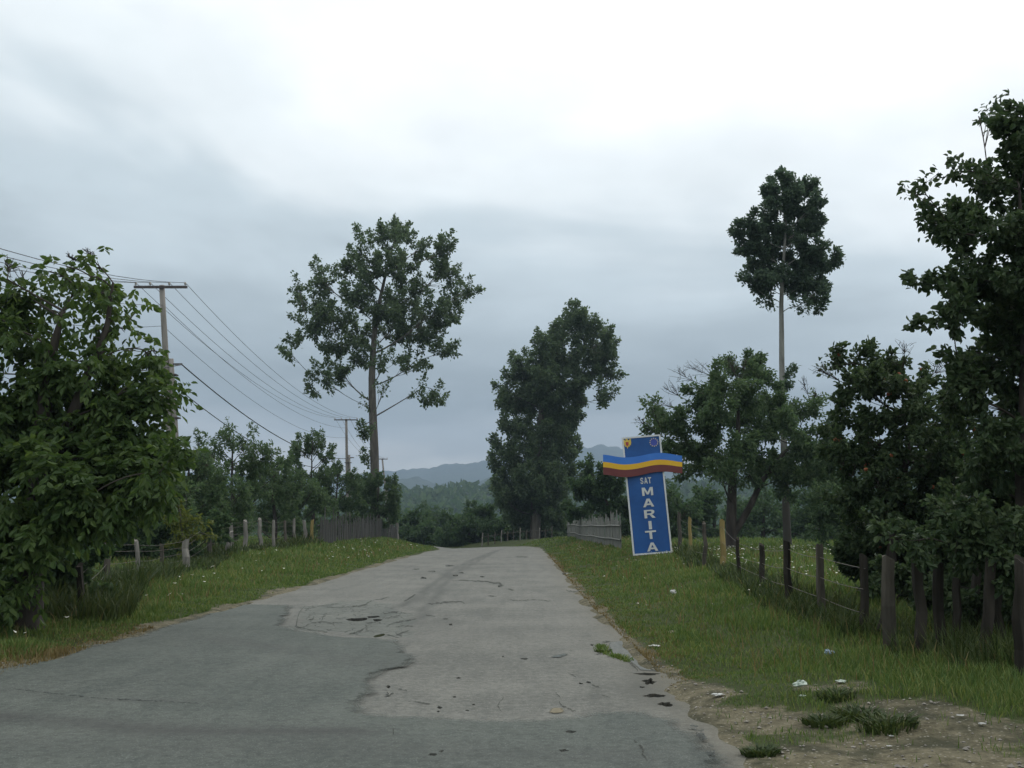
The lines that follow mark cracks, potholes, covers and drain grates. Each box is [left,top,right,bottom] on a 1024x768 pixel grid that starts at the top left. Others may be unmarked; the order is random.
crack [296,594,465,636]
crack [455,580,547,601]
